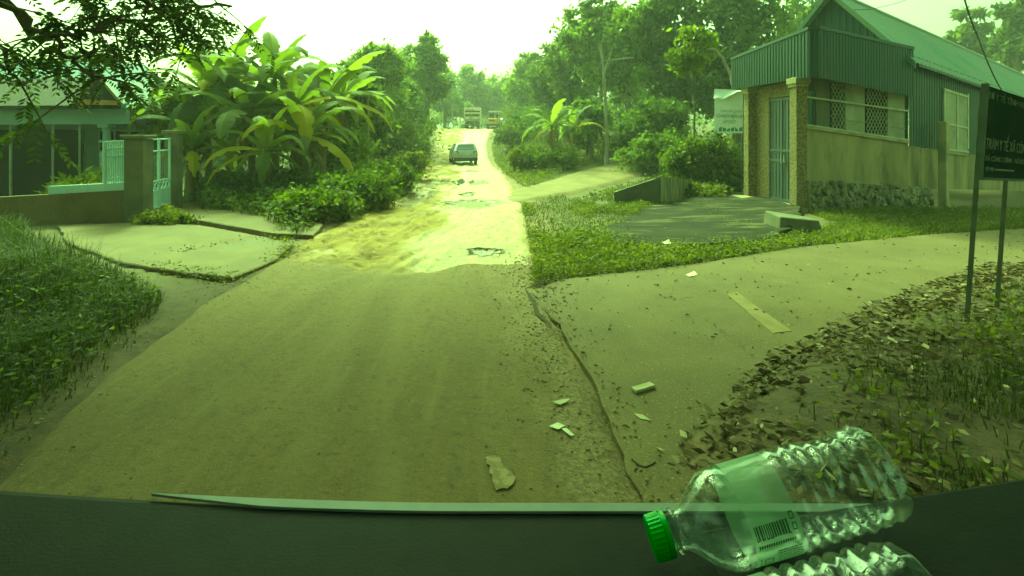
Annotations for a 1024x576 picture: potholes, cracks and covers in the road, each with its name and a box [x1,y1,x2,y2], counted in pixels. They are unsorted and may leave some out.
pothole [443,199,502,209]
pothole [466,247,505,257]
